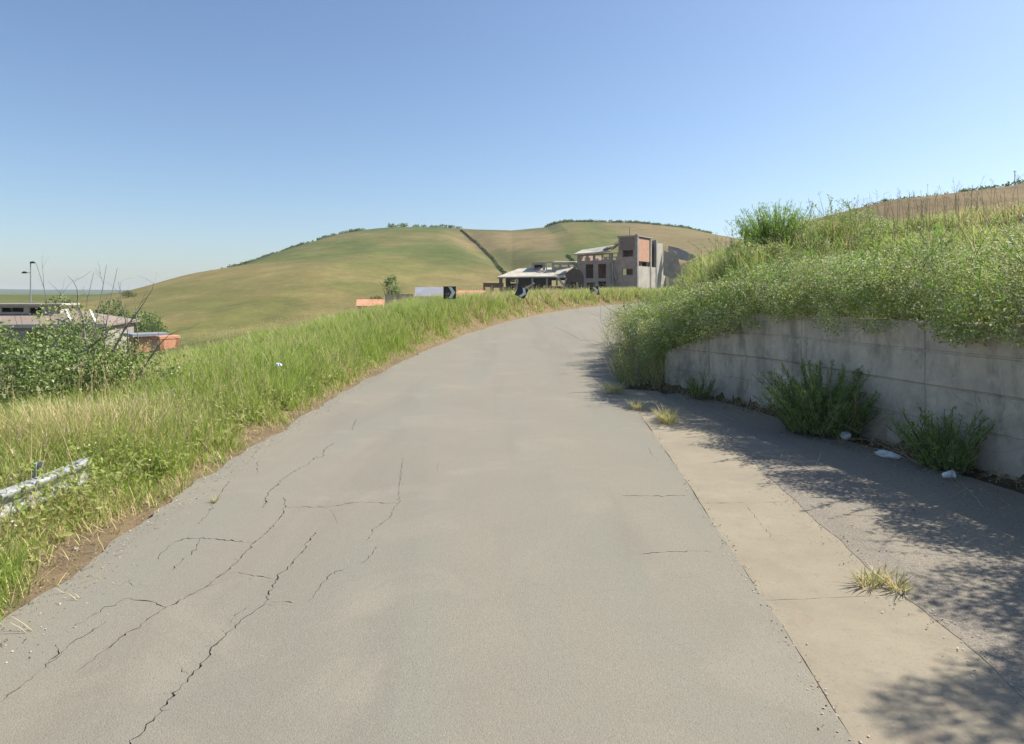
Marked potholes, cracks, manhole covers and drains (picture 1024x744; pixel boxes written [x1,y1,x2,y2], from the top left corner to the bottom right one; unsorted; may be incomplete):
crack [5,463,403,744]
